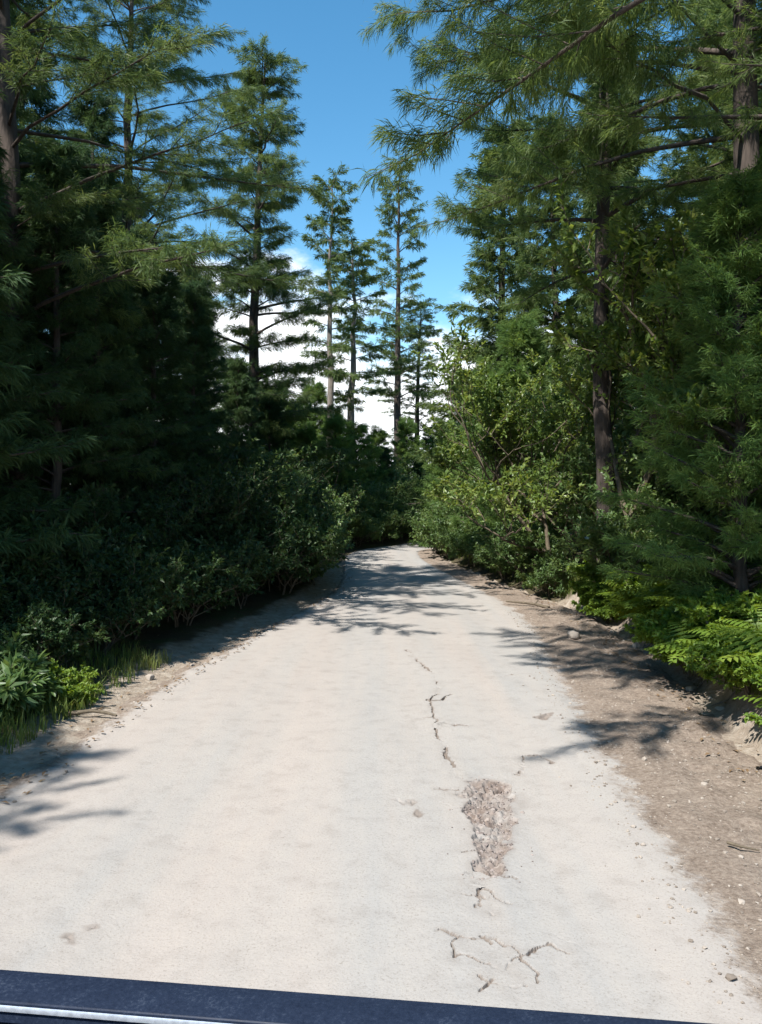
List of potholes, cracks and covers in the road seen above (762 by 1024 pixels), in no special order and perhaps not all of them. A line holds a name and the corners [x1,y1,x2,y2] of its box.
crack [397,648,522,780]
pothole [421,768,543,888]
crack [415,869,592,1008]
